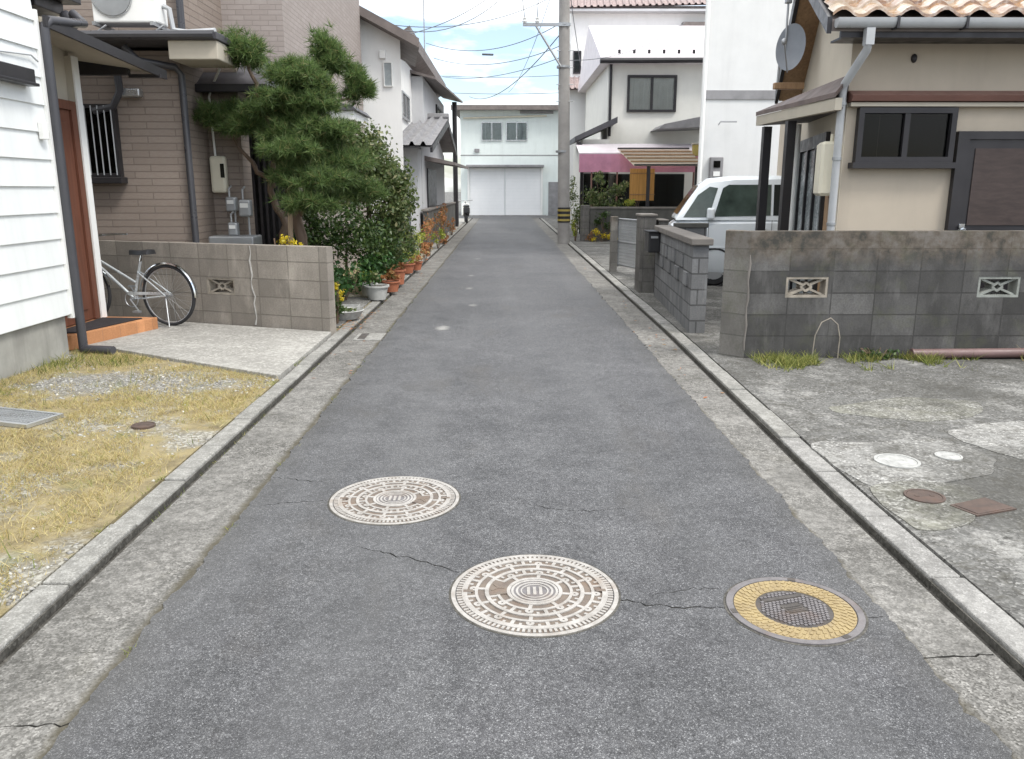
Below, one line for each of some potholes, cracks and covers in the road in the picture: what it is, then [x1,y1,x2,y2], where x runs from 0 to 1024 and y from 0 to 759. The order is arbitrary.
utility cover [873,453,921,469]
manhole cover [131,421,156,430]
manhole cover [723,577,869,647]
manhole cover [449,554,621,638]
manhole cover [327,476,461,526]
crack [621,588,725,609]
crack [361,547,455,572]
utility cover [934,451,963,461]
drain grate [0,407,64,429]
manhole cover [903,488,946,504]
